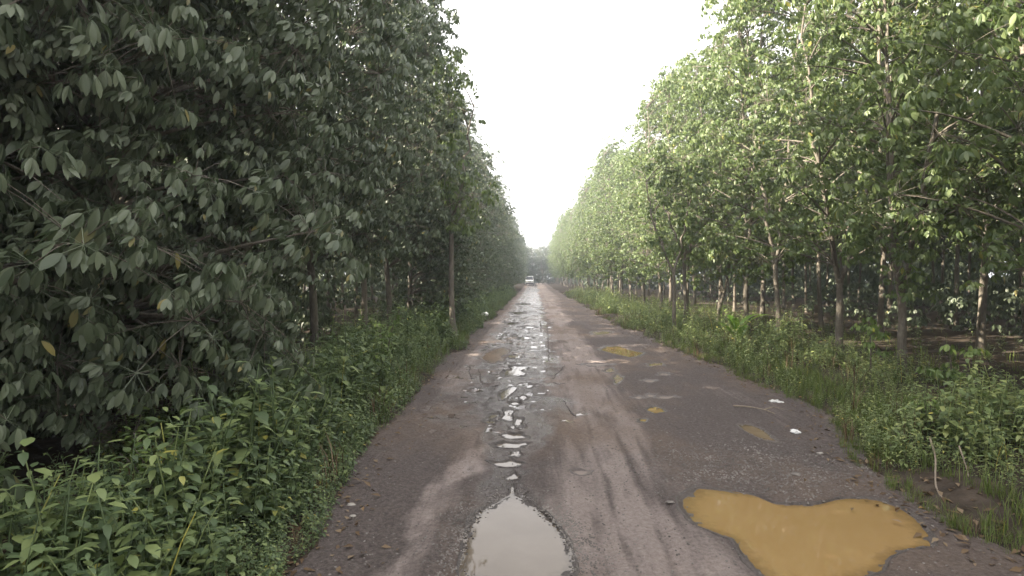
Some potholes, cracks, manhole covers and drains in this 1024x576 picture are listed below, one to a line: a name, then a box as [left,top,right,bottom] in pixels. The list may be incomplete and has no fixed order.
pothole [498,406,516,422]
pothole [497,386,518,401]
pothole [488,440,532,449]
pothole [512,416,525,428]
pothole [478,347,511,364]
pothole [456,495,580,576]
pothole [498,431,531,440]
pothole [596,345,646,358]
pothole [737,423,781,443]
pothole [504,470,523,481]
